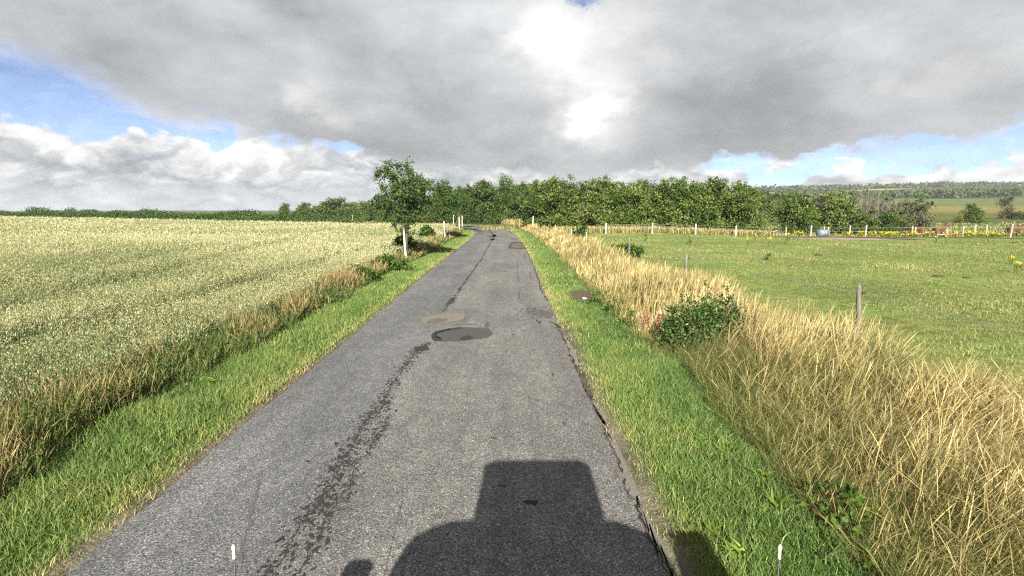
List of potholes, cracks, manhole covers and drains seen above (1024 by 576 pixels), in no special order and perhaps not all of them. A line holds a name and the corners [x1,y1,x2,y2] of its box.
crack [596,408,674,574]
